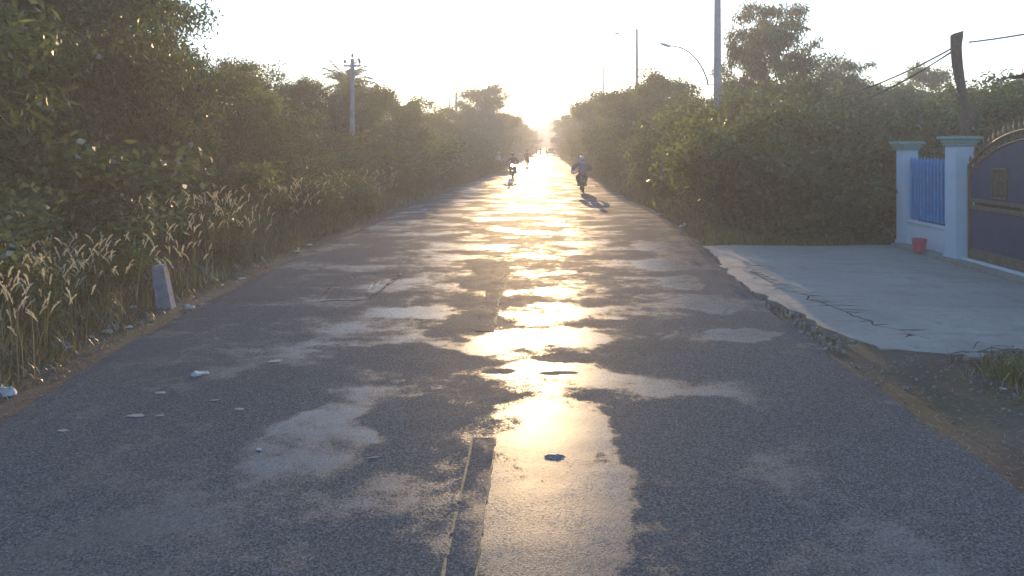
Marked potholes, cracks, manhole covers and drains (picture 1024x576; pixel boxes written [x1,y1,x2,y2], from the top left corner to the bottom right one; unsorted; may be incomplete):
pothole [544,454,566,462]
crack [746,264,927,338]
